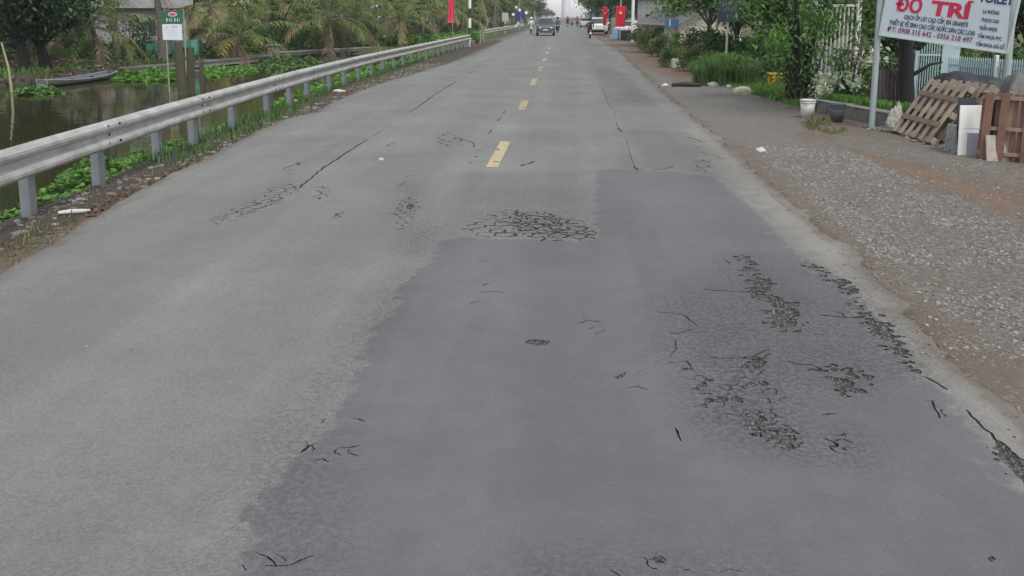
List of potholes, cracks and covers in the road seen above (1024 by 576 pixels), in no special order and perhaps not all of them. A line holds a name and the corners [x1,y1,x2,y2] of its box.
crack [823,433,853,454]
crack [655,292,837,453]
crack [212,72,471,225]
crack [594,63,673,170]
crack [241,552,314,570]
crack [300,441,359,462]
